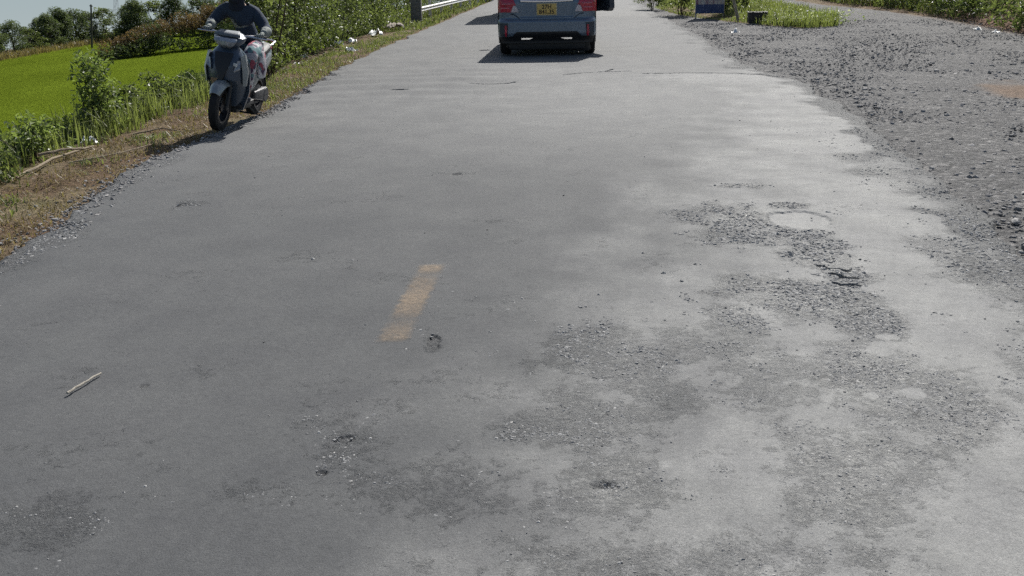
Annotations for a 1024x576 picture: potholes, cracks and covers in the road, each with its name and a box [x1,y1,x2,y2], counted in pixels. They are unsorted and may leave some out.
crack [806,263,874,290]
